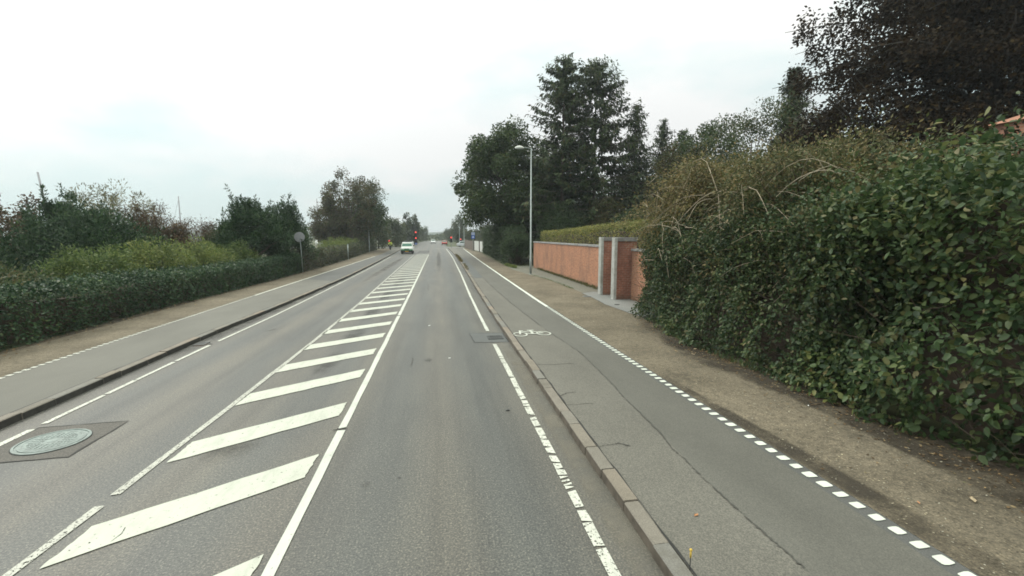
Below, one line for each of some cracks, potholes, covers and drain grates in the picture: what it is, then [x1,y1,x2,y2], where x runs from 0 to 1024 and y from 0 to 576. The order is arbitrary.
manhole cover [9,429,93,456]
